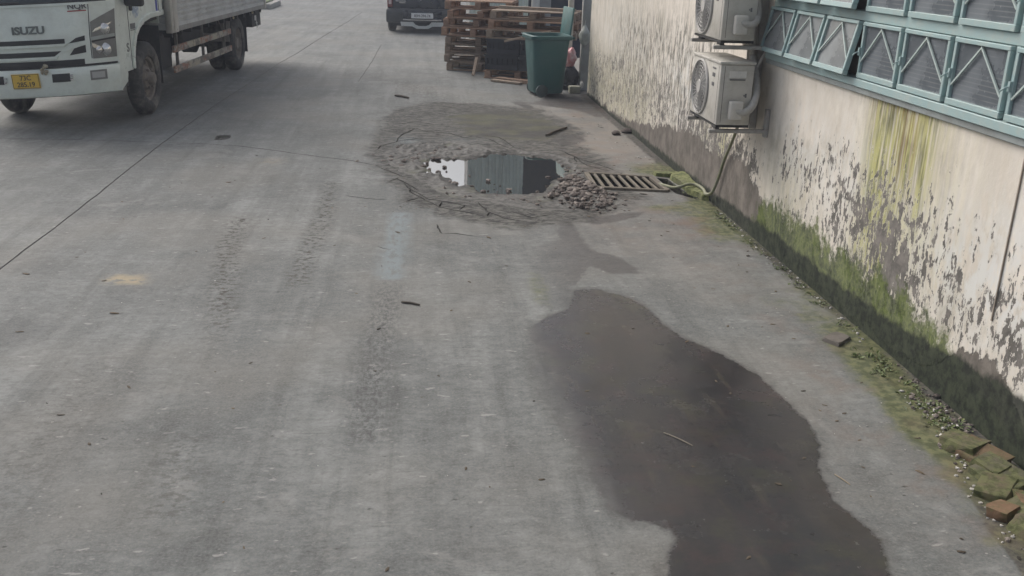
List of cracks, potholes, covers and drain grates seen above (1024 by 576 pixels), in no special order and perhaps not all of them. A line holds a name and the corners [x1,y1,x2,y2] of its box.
drain grate [584,171,670,193]
pothole [383,141,623,210]
